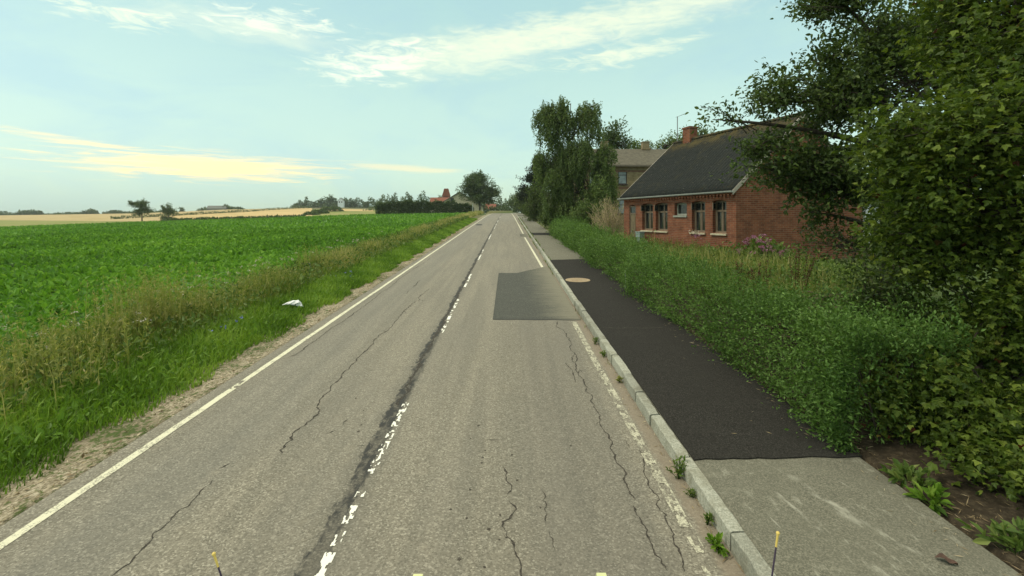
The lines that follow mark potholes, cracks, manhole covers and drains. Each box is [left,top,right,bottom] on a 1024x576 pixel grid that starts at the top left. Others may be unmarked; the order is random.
crack [279,258,430,453]
crack [557,322,685,570]
crack [502,467,522,576]
crack [113,463,230,575]
